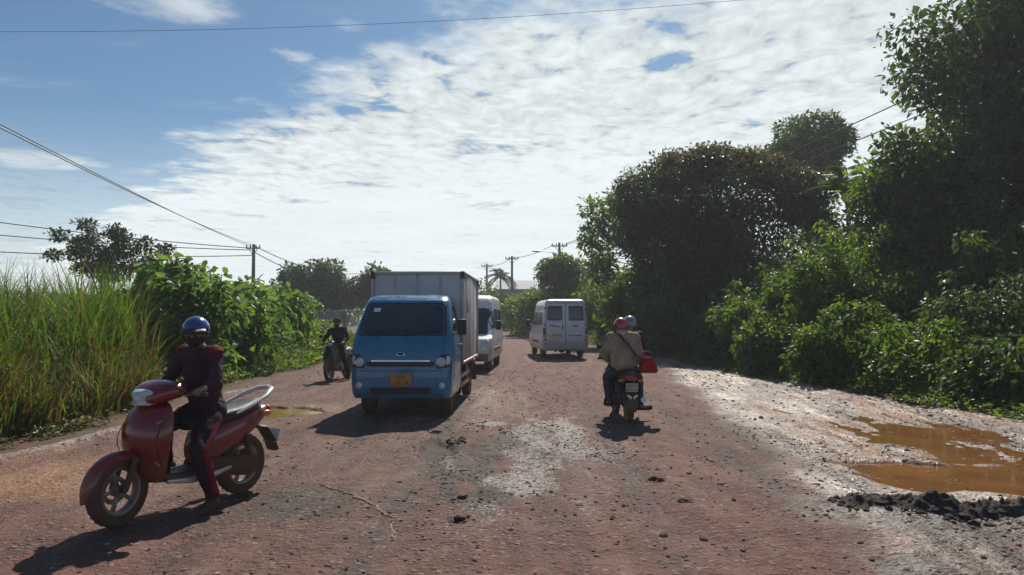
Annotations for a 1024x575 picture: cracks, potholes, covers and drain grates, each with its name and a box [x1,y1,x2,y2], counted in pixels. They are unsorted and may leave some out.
pothole [263,405,339,420]
crack [320,484,396,541]
